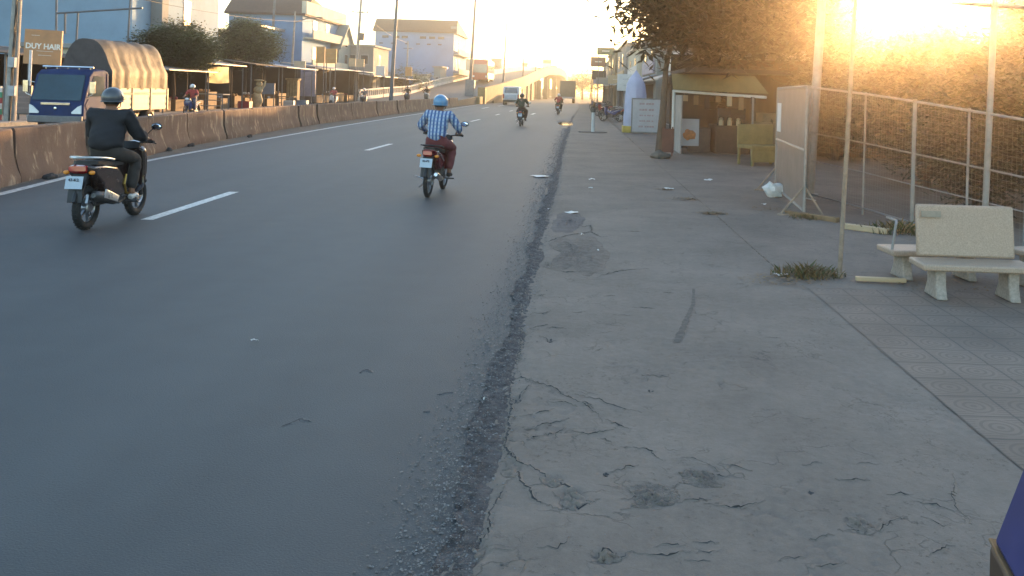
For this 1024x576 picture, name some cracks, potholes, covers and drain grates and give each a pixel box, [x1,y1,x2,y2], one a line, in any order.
pothole [539,476,563,488]
crack [282,418,311,427]
pothole [550,213,586,233]
crack [440,289,663,576]
crack [591,540,719,564]
pothole [501,462,521,478]
pothole [561,487,586,511]
pothole [470,546,486,561]
crack [779,462,972,570]
crack [620,457,766,510]
